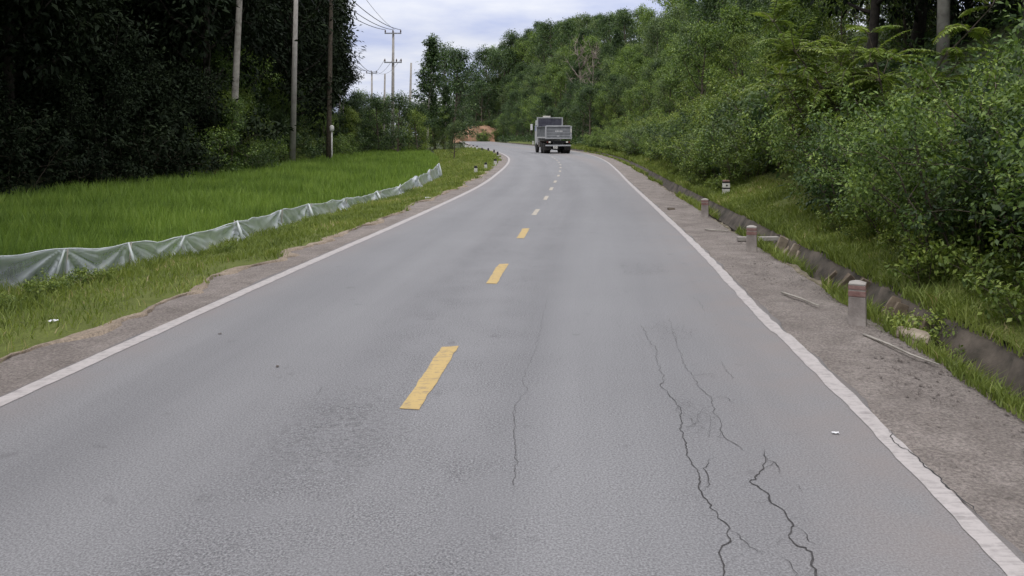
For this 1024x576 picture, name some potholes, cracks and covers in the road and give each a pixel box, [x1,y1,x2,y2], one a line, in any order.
crack [512,302,547,487]
crack [750,451,817,576]
crack [641,320,756,576]
